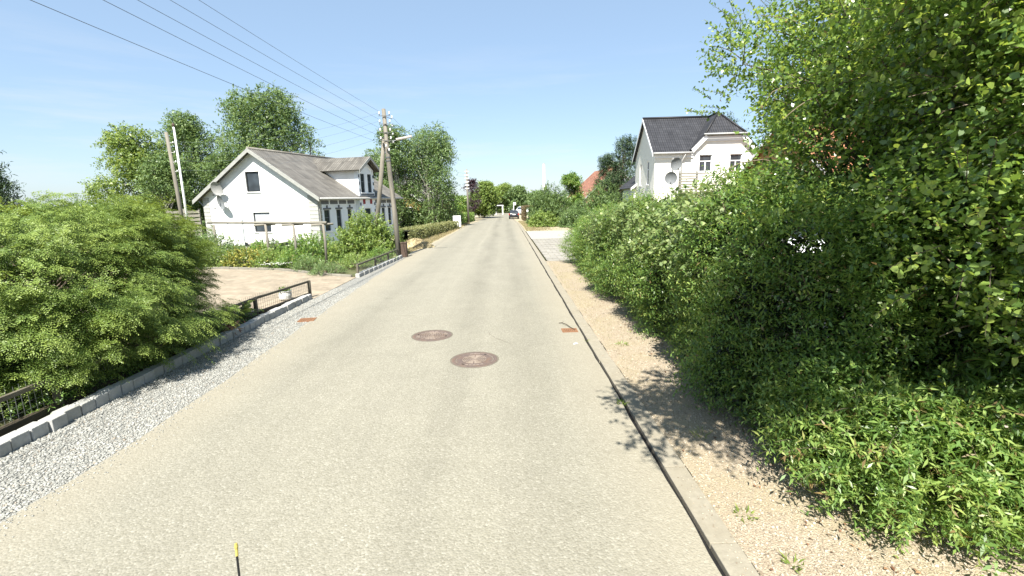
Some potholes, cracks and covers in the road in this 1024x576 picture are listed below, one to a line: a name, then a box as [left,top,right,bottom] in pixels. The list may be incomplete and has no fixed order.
manhole cover [450,352,499,368]
manhole cover [411,330,453,342]
